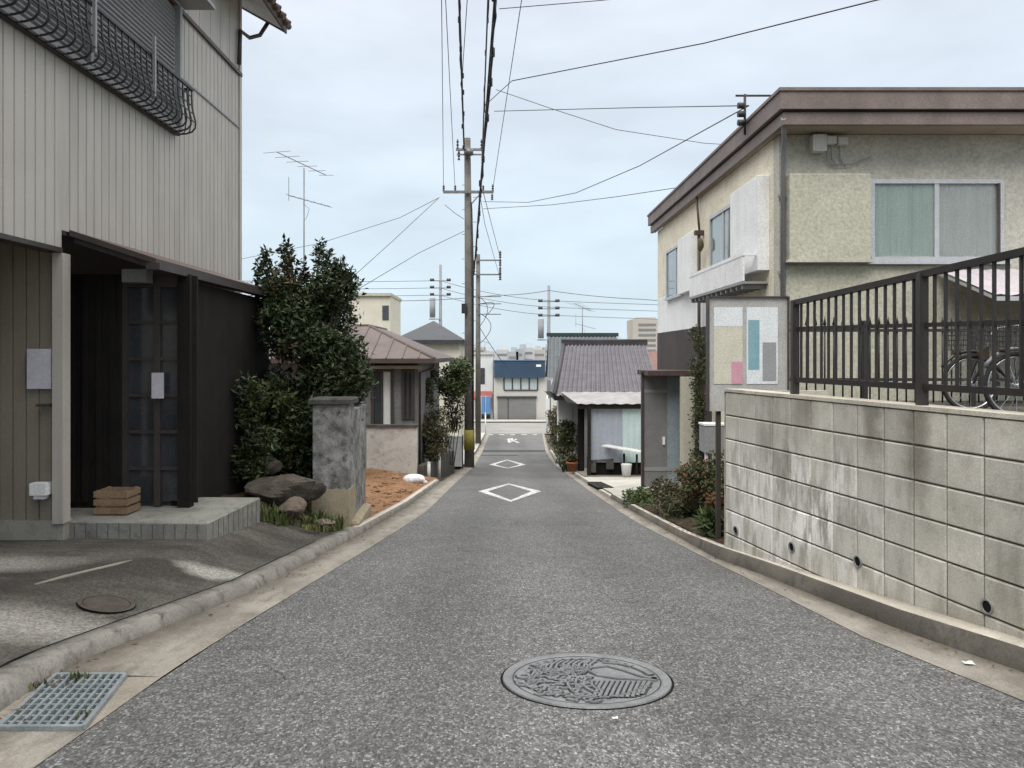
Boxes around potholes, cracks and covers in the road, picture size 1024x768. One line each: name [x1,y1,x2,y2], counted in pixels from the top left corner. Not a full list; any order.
drain grate [587,482,614,490]
manhole cover [500,653,674,710]
drain grate [0,672,128,742]
manhole cover [76,594,136,613]
